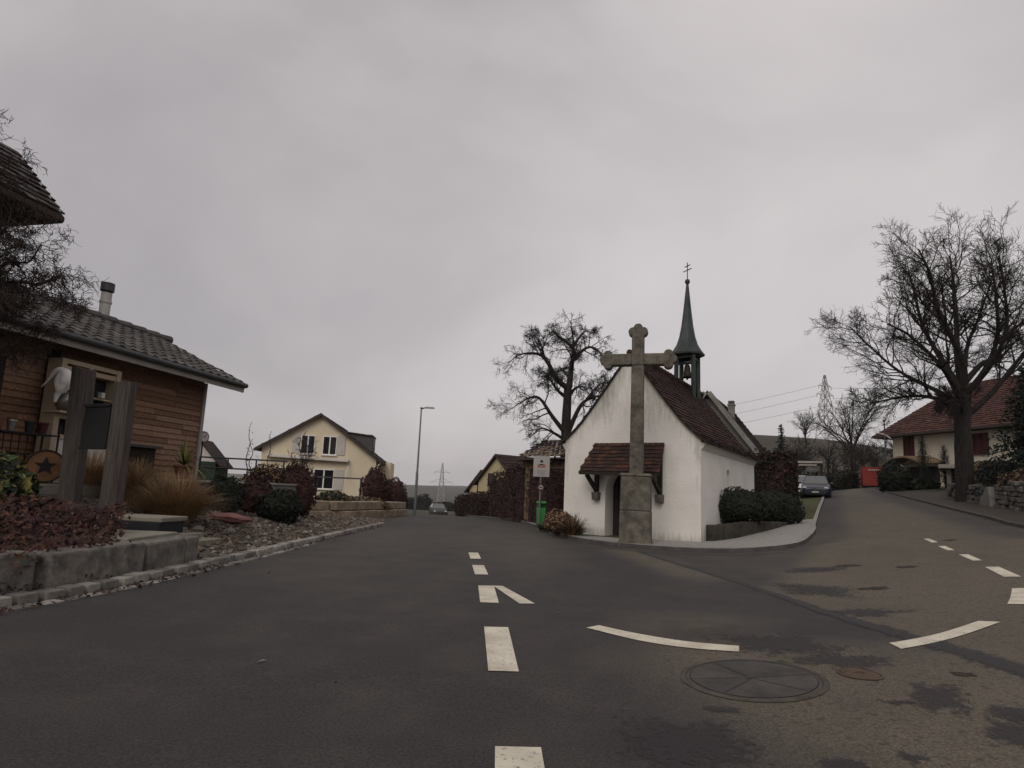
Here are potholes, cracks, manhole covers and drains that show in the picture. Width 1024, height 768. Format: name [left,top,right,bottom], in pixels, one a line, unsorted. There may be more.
manhole cover [836,667,884,680]
manhole cover [680,659,830,702]
